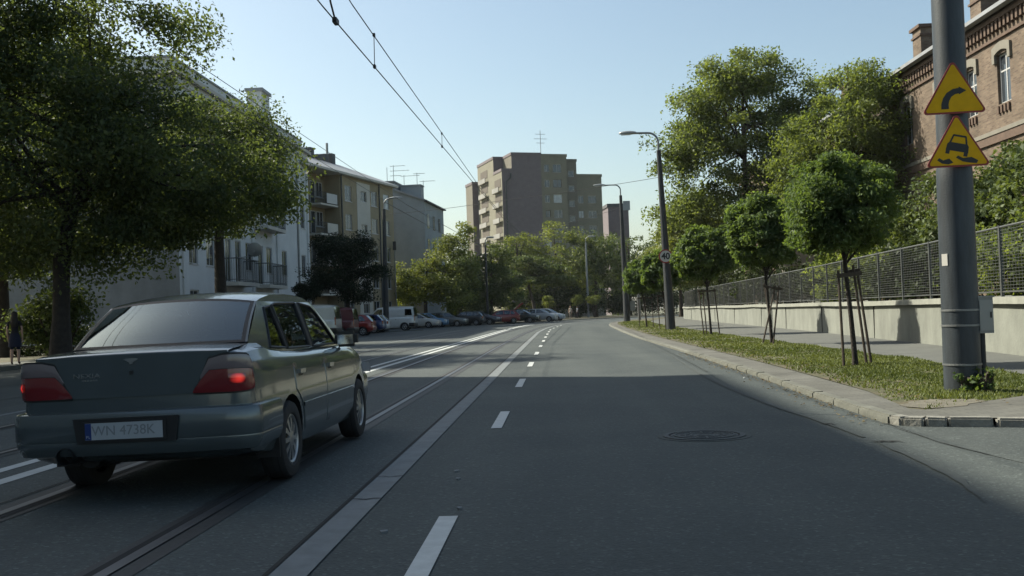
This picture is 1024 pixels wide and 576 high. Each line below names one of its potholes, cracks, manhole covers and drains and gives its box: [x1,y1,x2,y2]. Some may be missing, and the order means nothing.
manhole cover [657,430,752,442]
